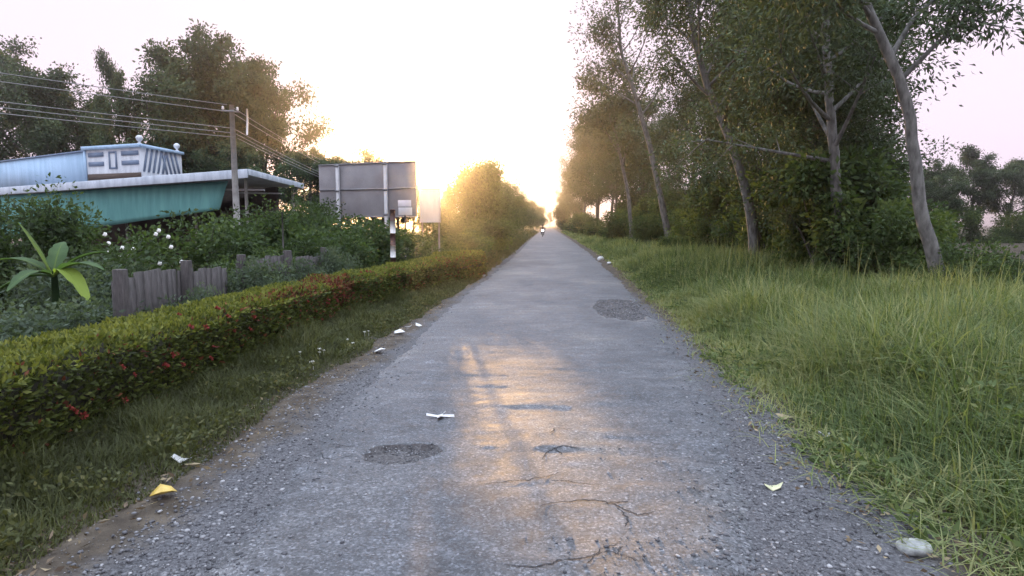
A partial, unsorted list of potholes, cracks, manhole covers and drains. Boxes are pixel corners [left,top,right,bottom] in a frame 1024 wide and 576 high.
crack [505,544,637,568]
crack [485,428,655,526]
